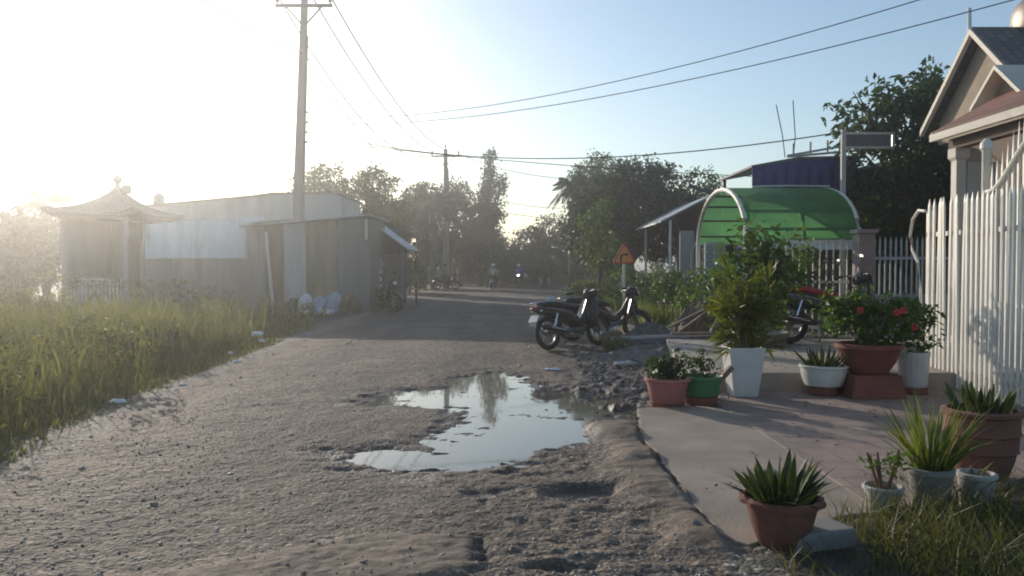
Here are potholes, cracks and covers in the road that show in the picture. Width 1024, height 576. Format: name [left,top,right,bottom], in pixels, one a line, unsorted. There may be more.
pothole [531,477,629,501]
pothole [322,371,639,473]
pothole [493,466,533,475]
pothole [471,537,500,562]
